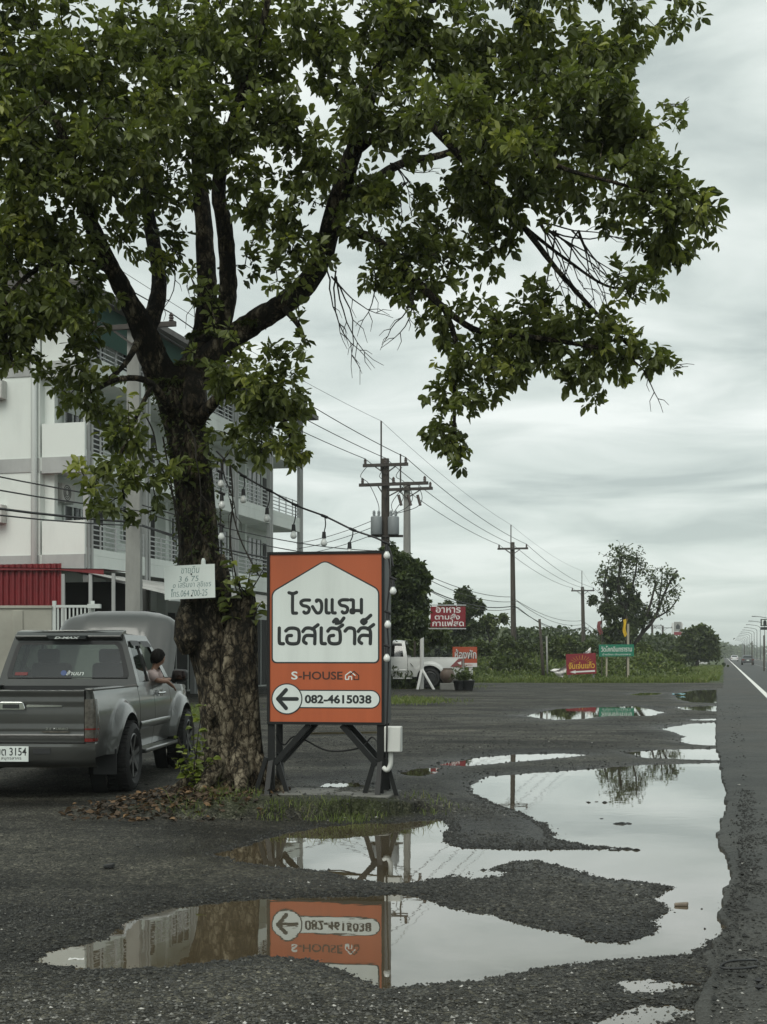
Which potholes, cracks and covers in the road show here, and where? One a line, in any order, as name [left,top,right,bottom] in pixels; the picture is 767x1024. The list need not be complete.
pothole [621,747,721,760]
pothole [432,751,590,766]
pothole [671,689,717,703]
pothole [24,761,731,994]
pothole [522,705,668,720]
pothole [574,998,695,1024]
